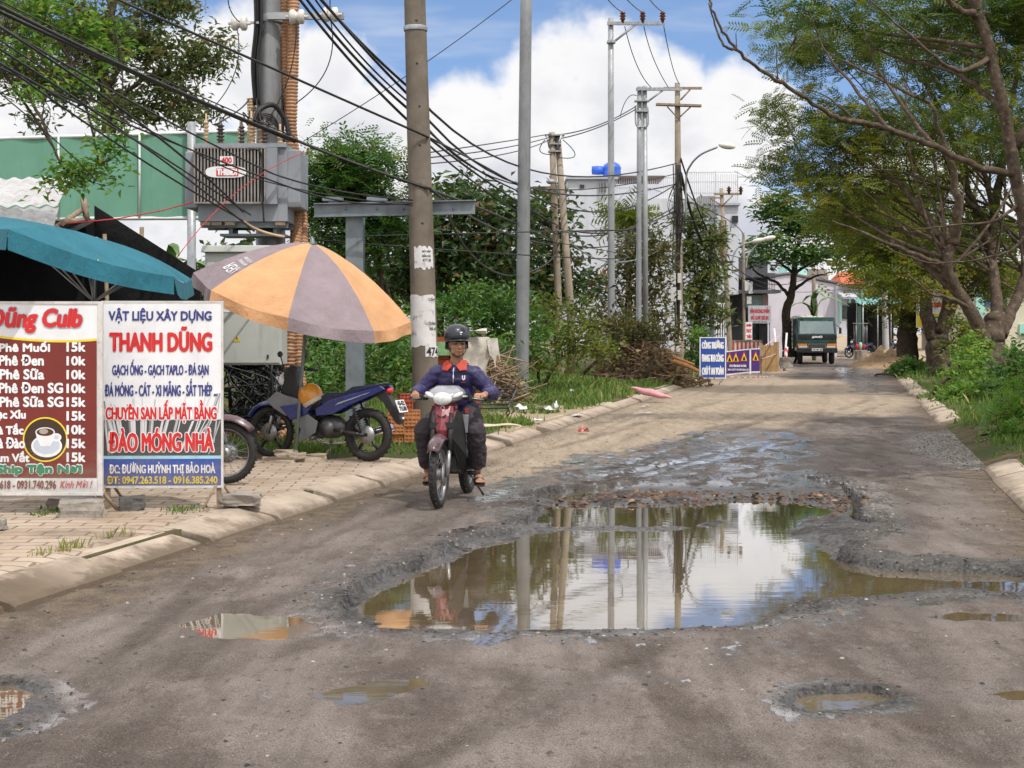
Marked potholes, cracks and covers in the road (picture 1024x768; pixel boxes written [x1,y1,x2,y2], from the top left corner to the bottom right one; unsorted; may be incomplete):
pothole [780,684,899,712]
pothole [336,476,1024,633]
pothole [0,677,58,737]
